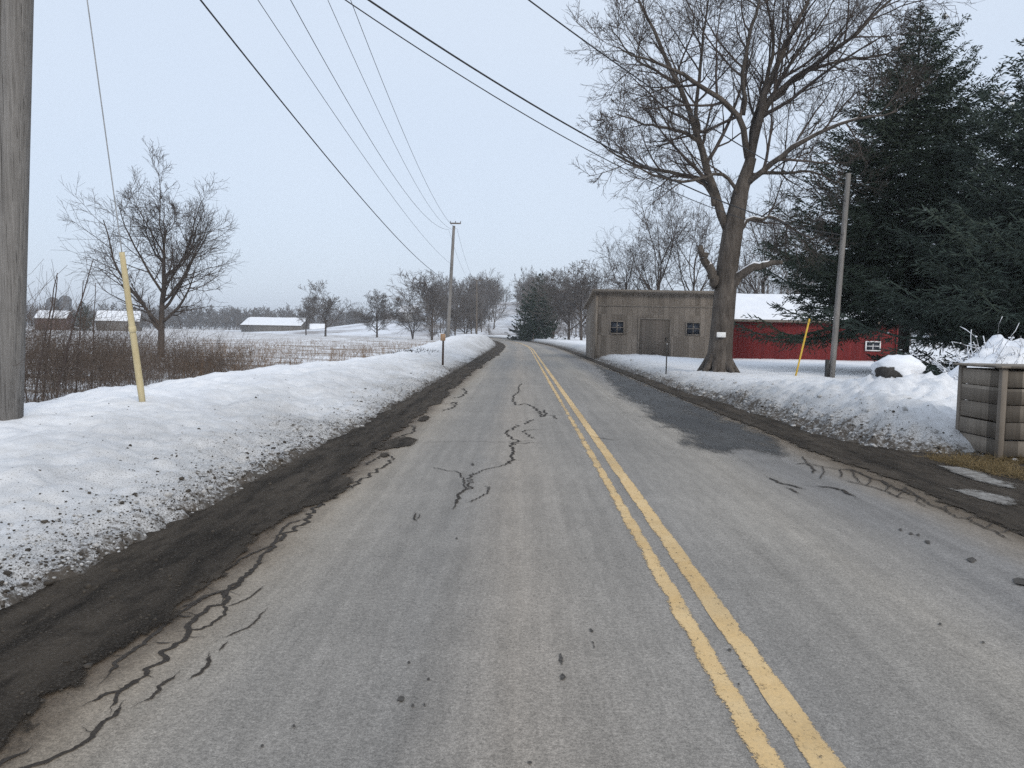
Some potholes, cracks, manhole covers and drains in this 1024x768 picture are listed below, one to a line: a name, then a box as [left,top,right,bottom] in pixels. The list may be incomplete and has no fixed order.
crack [769,456,1024,538]
crack [434,384,557,510]
crack [0,454,395,768]
